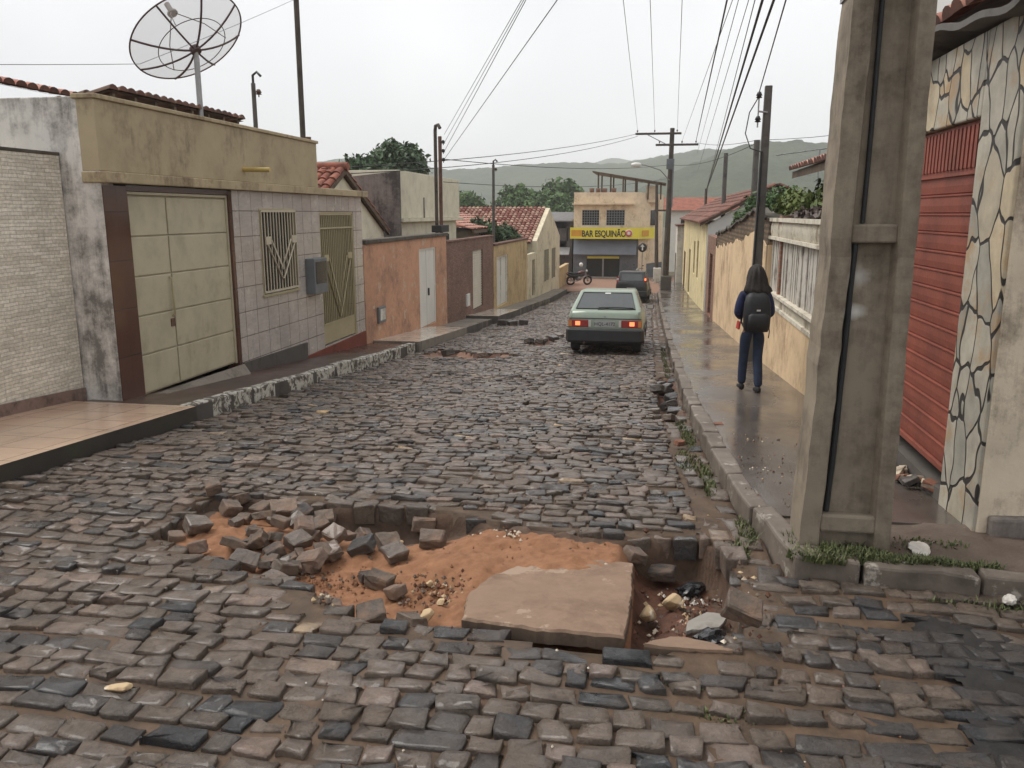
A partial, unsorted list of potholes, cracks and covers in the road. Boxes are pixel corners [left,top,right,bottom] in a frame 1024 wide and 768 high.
pothole [653,378,685,424]
pothole [423,351,509,359]
pothole [153,498,742,656]
